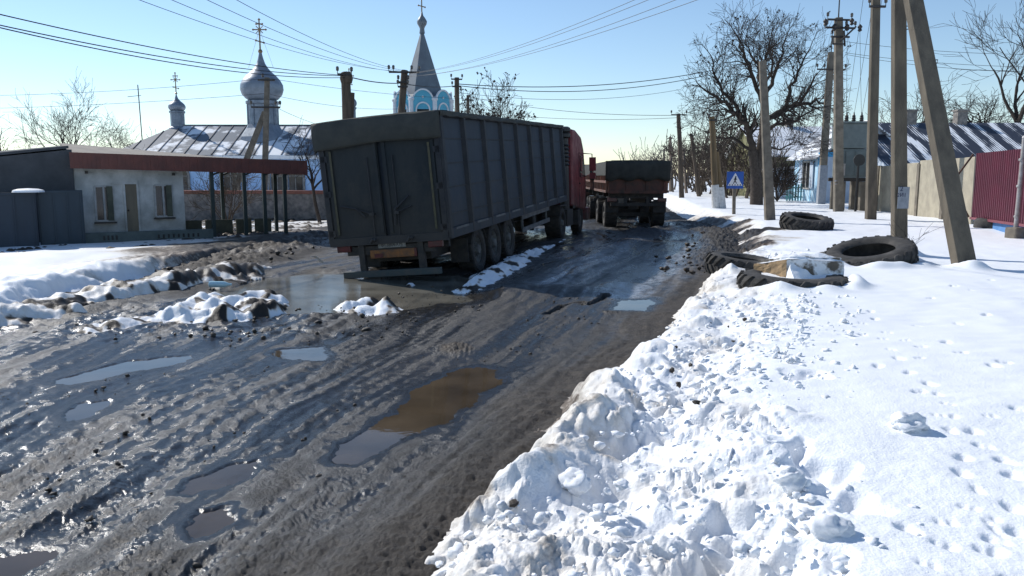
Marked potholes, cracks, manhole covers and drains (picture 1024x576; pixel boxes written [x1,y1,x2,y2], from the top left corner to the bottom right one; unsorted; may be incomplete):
pothole [174,501,247,543]
pothole [54,397,126,423]
pothole [321,365,512,467]
pothole [45,353,199,386]
pothole [608,297,662,312]
pothole [166,456,267,498]
pothole [264,345,337,362]
pothole [0,541,69,576]
